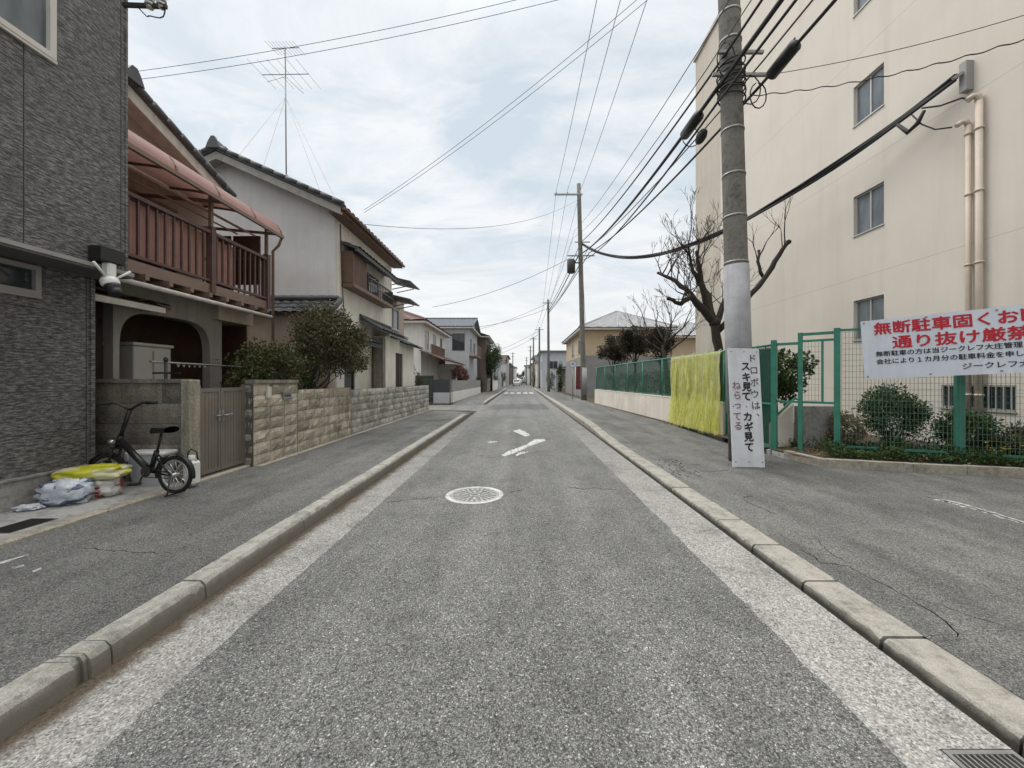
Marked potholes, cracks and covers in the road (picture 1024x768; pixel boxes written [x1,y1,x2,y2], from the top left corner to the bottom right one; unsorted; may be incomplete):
drain grate [0,518,58,533]
crack [802,538,1018,639]
manhole cover [445,487,504,504]
drain grate [942,750,1024,768]
